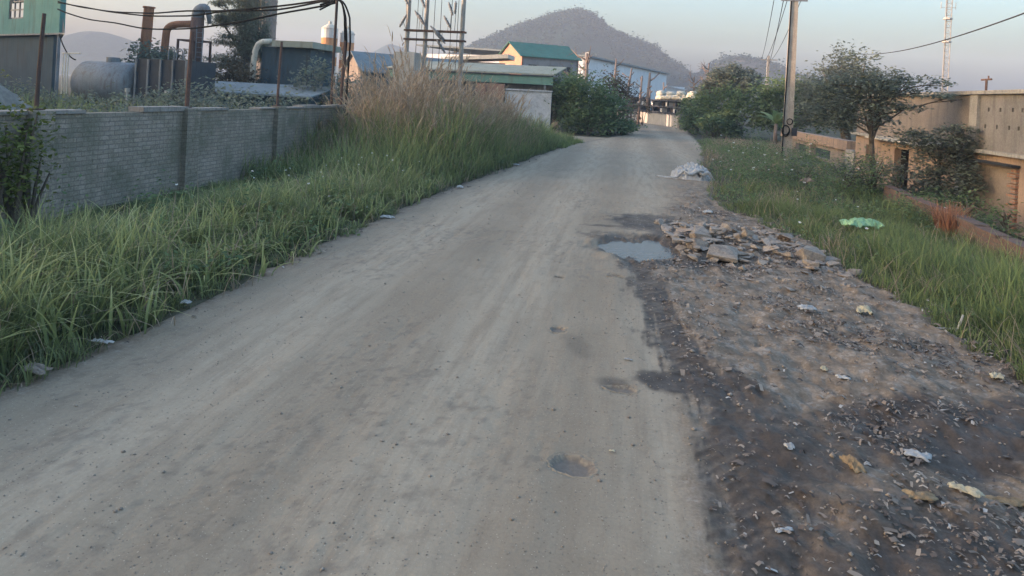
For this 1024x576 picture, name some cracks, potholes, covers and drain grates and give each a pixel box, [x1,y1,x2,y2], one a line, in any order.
pothole [601,385,640,395]
pothole [548,326,566,334]
pothole [546,453,600,479]
